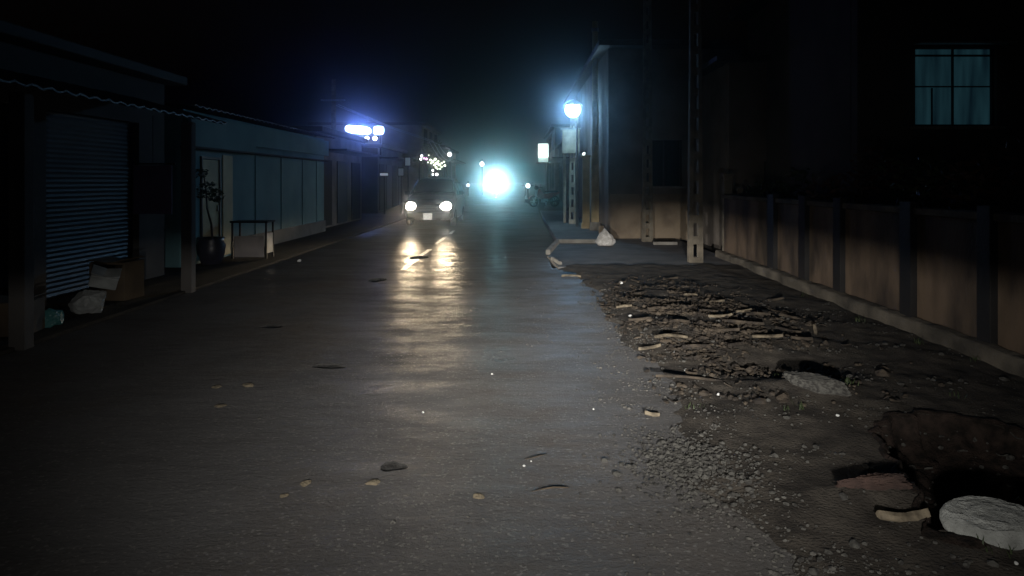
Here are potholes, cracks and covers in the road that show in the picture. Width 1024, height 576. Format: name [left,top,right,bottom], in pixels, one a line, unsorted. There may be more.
pothole [867,409,1024,549]
